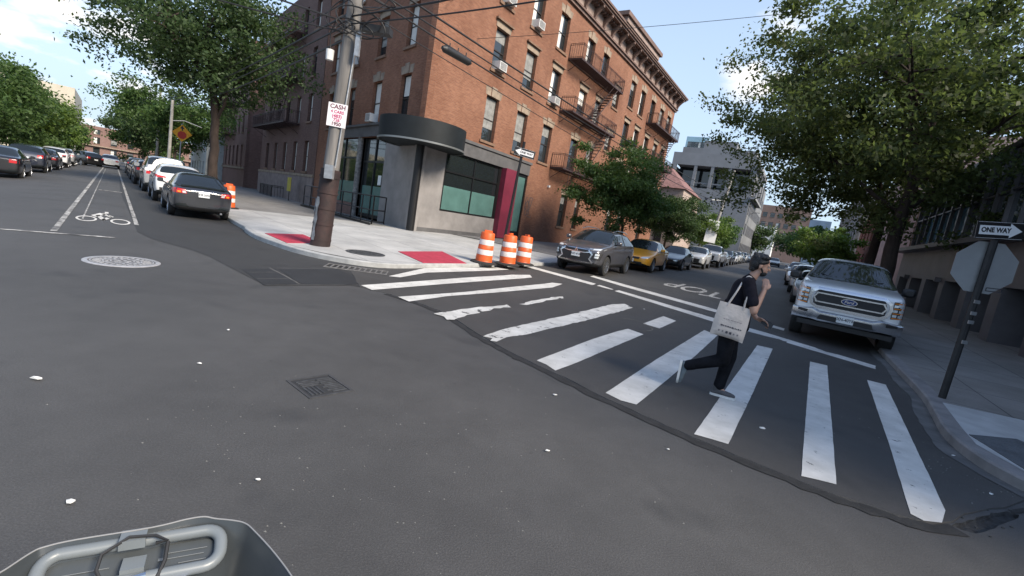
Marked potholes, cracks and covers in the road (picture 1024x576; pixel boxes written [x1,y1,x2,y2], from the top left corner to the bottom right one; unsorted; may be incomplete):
manhole cover [81,256,161,268]
manhole cover [345,249,385,257]
drain grate [323,263,389,275]
